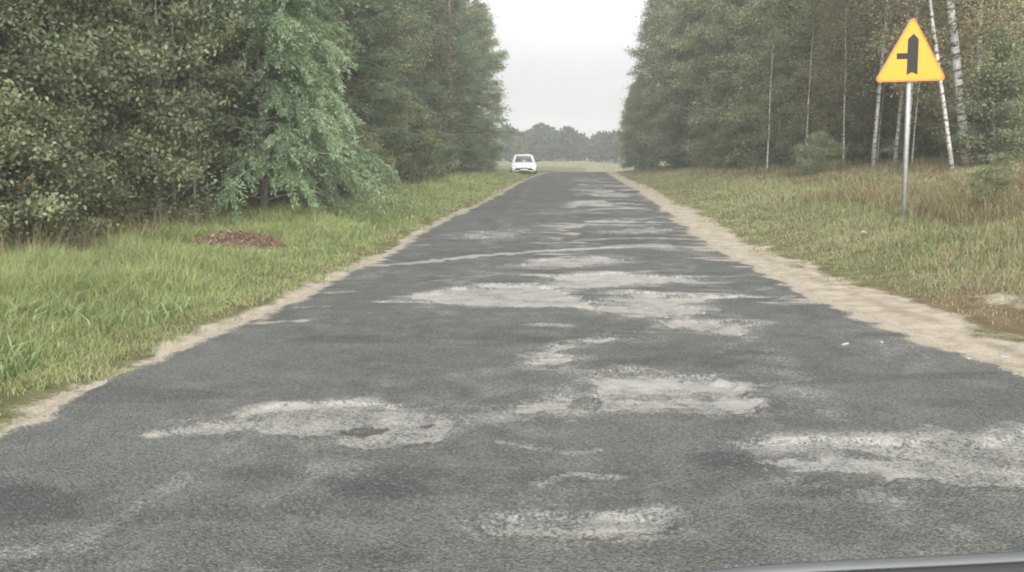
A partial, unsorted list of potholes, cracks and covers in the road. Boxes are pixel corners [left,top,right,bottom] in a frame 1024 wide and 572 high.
pothole [579,367,766,415]
pothole [143,399,469,450]
